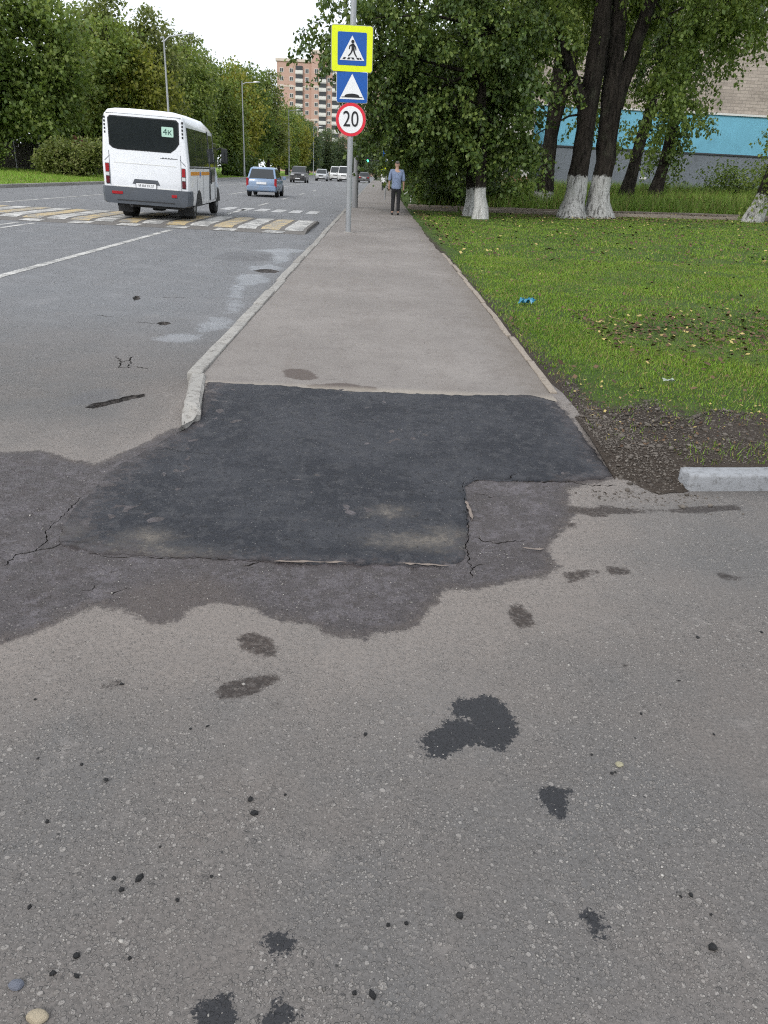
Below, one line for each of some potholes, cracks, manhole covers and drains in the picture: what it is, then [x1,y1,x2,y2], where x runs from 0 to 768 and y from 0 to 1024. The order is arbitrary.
crack [462,476,616,577]
crack [4,497,81,566]
